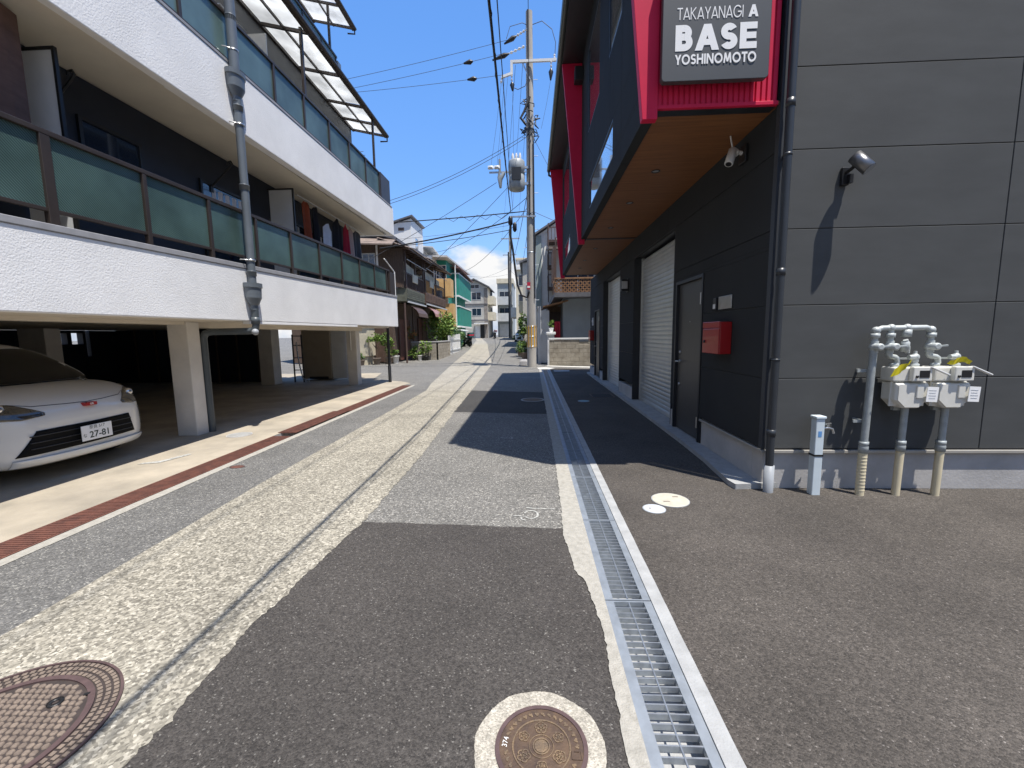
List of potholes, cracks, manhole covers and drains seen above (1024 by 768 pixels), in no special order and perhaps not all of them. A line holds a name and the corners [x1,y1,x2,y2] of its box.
manhole cover [474,691,607,768]
manhole cover [0,660,124,768]
